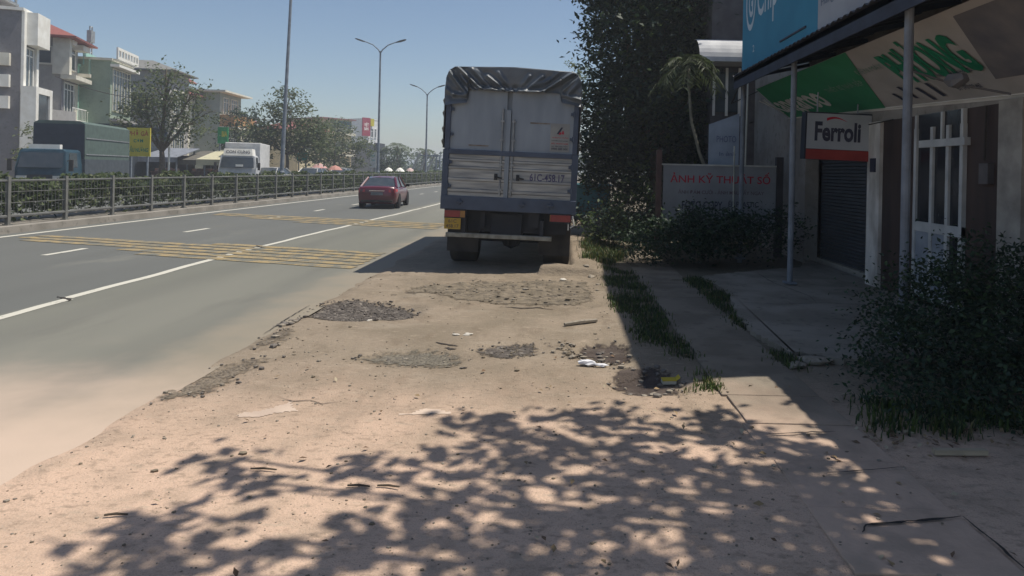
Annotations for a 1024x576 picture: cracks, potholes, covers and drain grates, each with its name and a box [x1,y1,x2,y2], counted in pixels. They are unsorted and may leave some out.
pothole [606,365,687,397]
pothole [578,339,633,365]
pothole [469,342,551,359]
pothole [297,298,422,322]
